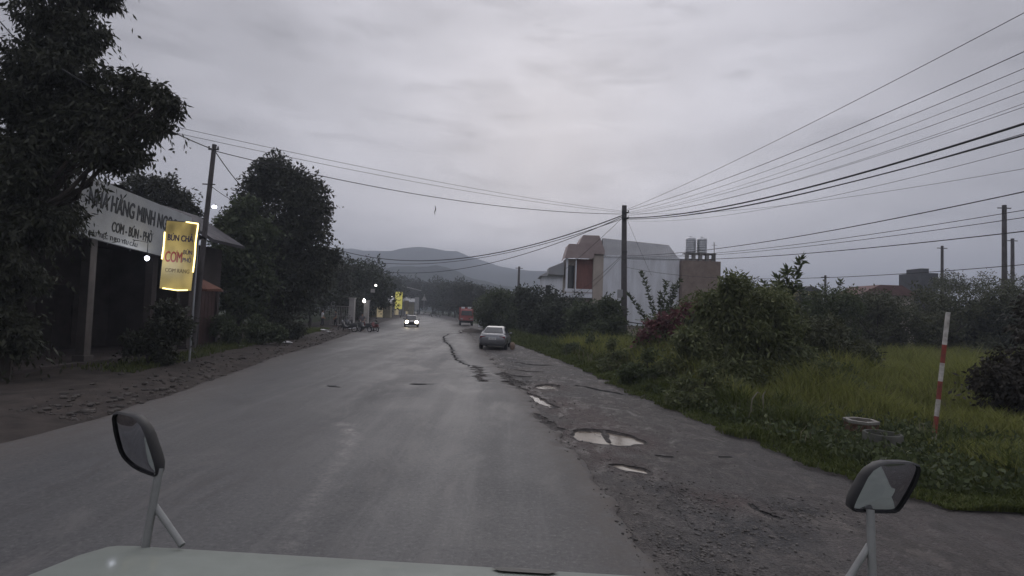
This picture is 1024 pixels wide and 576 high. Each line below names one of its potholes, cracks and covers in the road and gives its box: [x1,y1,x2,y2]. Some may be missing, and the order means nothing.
pothole [606,463,654,475]
crack [747,503,785,519]
pothole [526,392,562,408]
pothole [495,372,531,391]
crack [442,333,471,366]
pothole [568,428,649,447]
